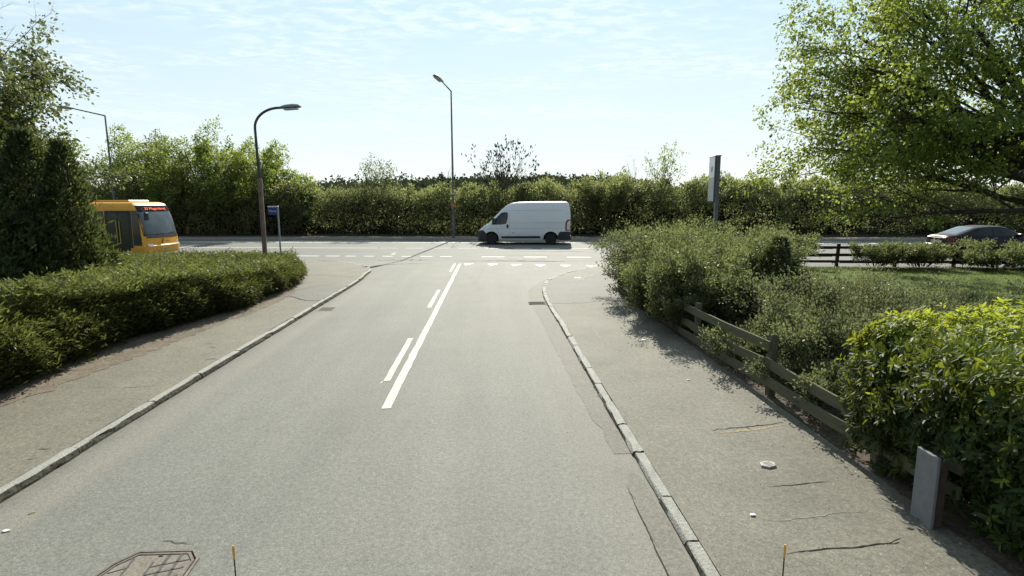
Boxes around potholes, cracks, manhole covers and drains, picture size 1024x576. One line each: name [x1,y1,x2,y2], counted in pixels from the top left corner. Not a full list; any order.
crack [787,538,900,554]
crack [631,494,669,576]
manhole cover [95,549,200,576]
